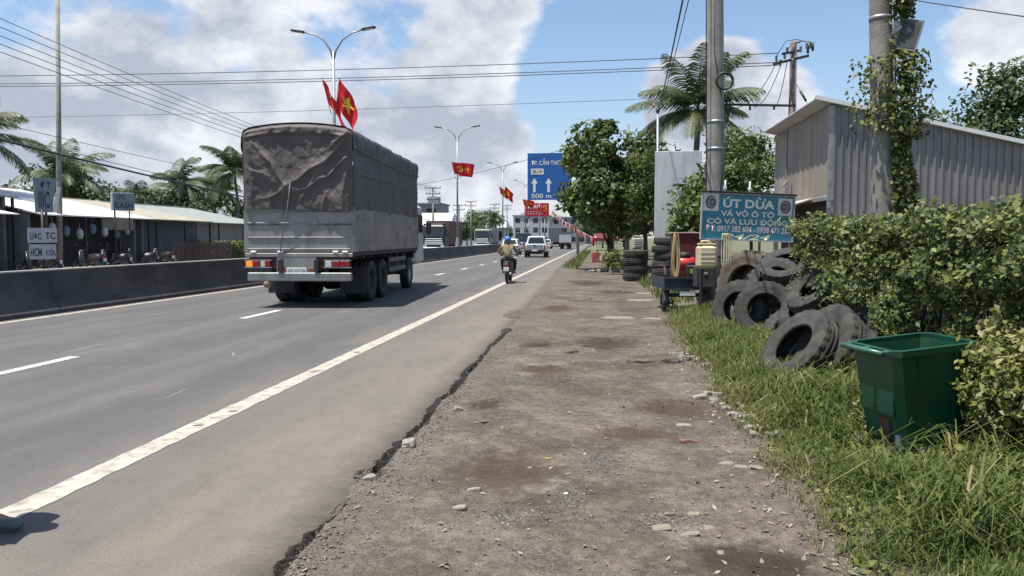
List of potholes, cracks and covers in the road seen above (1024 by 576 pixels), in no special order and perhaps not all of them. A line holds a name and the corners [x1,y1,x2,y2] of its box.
crack [372,333,504,474]
